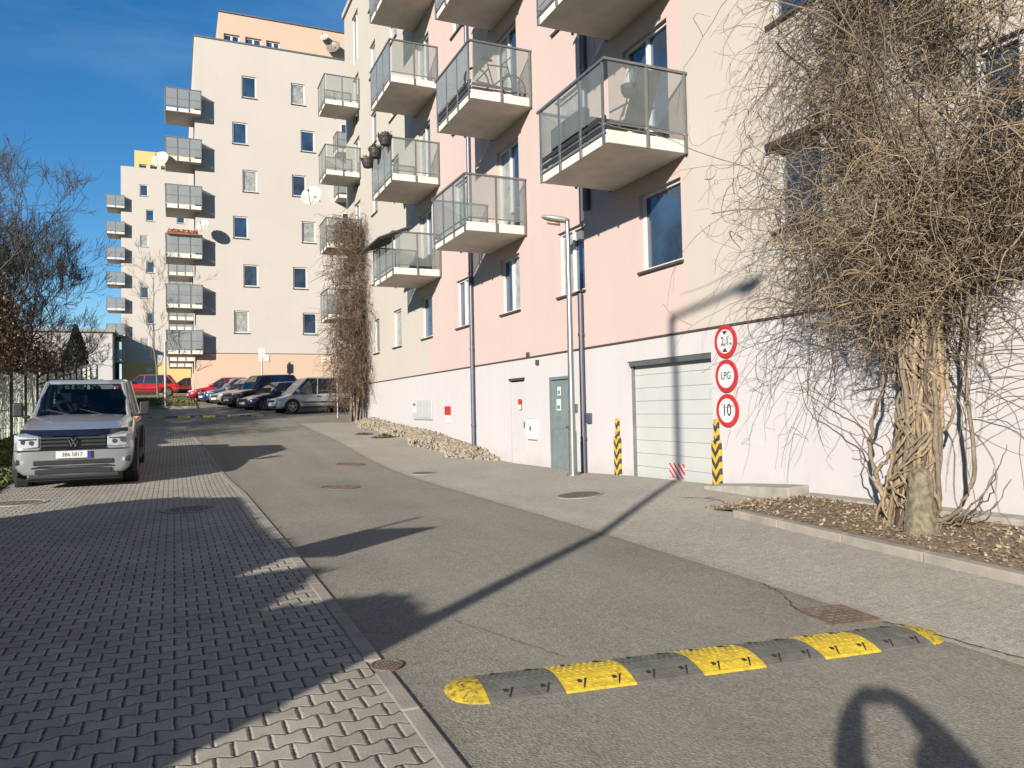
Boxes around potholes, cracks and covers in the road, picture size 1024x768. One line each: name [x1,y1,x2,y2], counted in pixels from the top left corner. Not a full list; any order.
manhole cover [555,490,604,499]
utility cover [370,659,403,672]
manhole cover [159,505,219,514]
crack [879,621,1023,658]
manhole cover [0,499,49,507]
crack [456,620,566,657]
